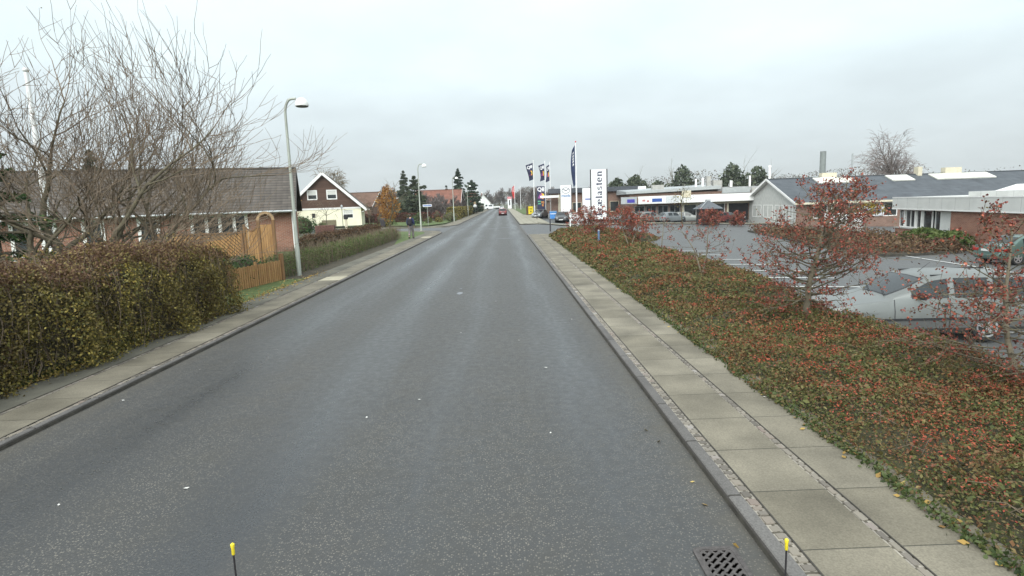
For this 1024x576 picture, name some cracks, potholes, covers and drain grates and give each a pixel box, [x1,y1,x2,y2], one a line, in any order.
drain grate [693,546,754,576]
